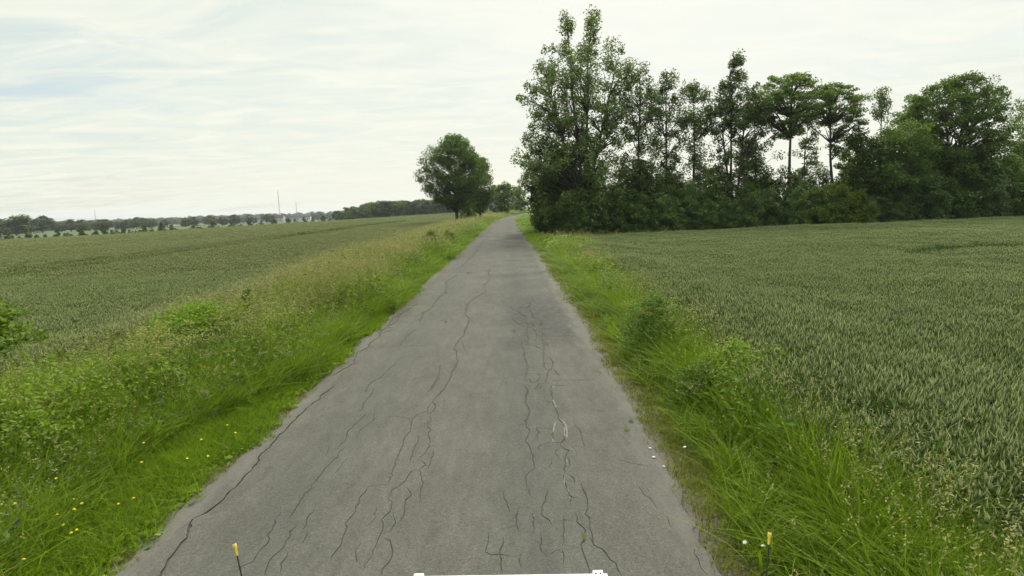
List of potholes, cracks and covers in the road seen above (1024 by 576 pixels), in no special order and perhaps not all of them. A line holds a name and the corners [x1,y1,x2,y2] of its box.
crack [485,305,621,575]
crack [159,240,491,576]
